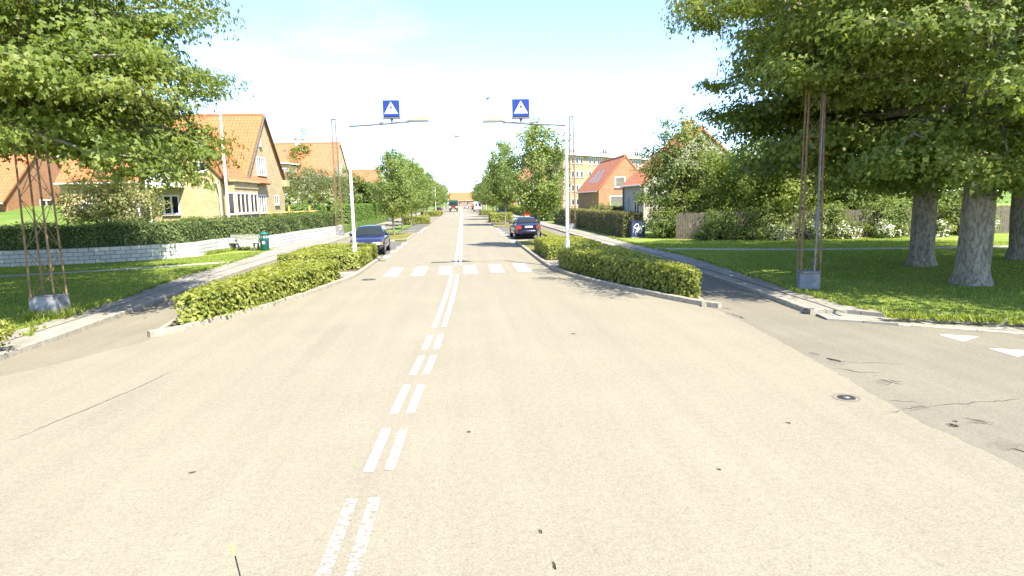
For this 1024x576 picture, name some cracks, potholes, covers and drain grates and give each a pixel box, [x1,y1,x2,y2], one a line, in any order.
manhole cover [832,393,861,402]
crack [839,361,1013,425]
